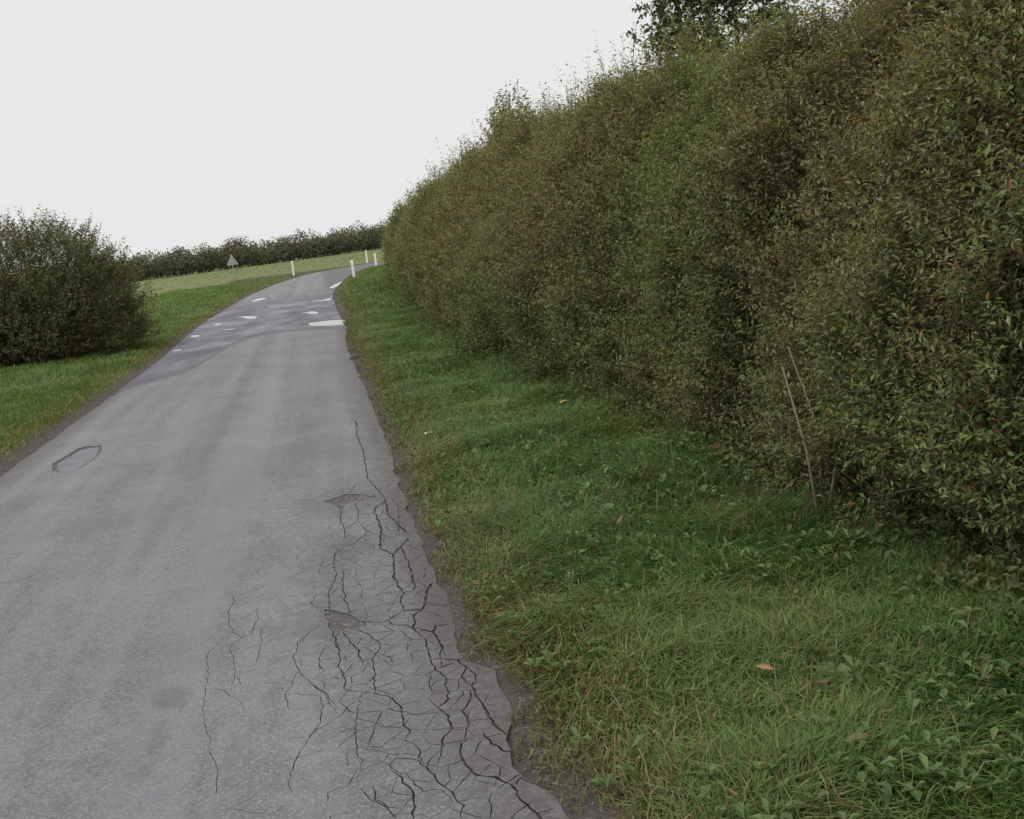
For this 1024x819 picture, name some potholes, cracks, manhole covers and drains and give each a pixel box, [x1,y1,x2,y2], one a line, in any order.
crack [288,726,318,793]
pothole [324,610,366,634]
